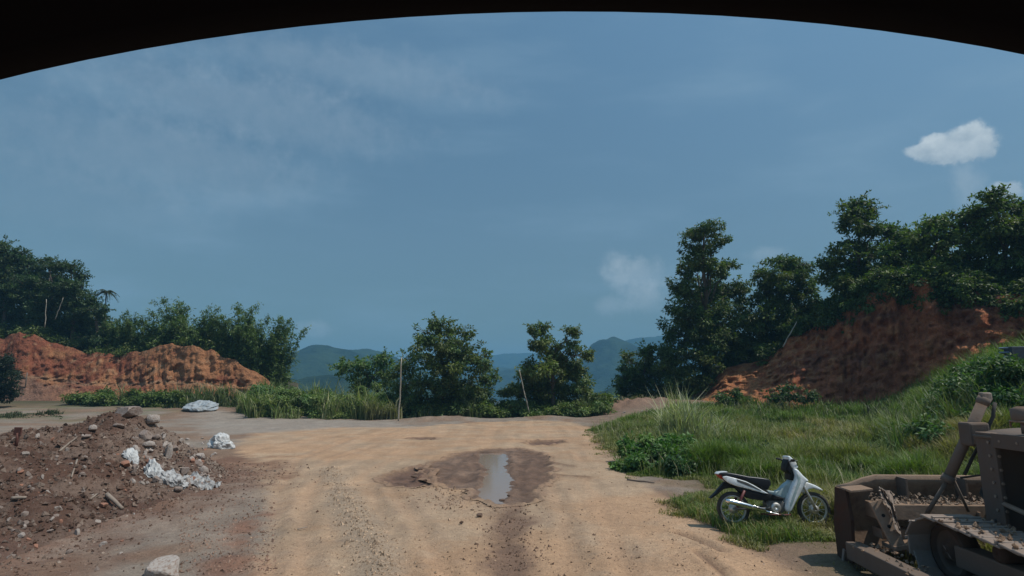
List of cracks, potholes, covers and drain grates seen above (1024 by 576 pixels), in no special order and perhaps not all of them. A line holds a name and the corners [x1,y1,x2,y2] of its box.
pothole [373,464,440,488]
pothole [414,447,562,508]
